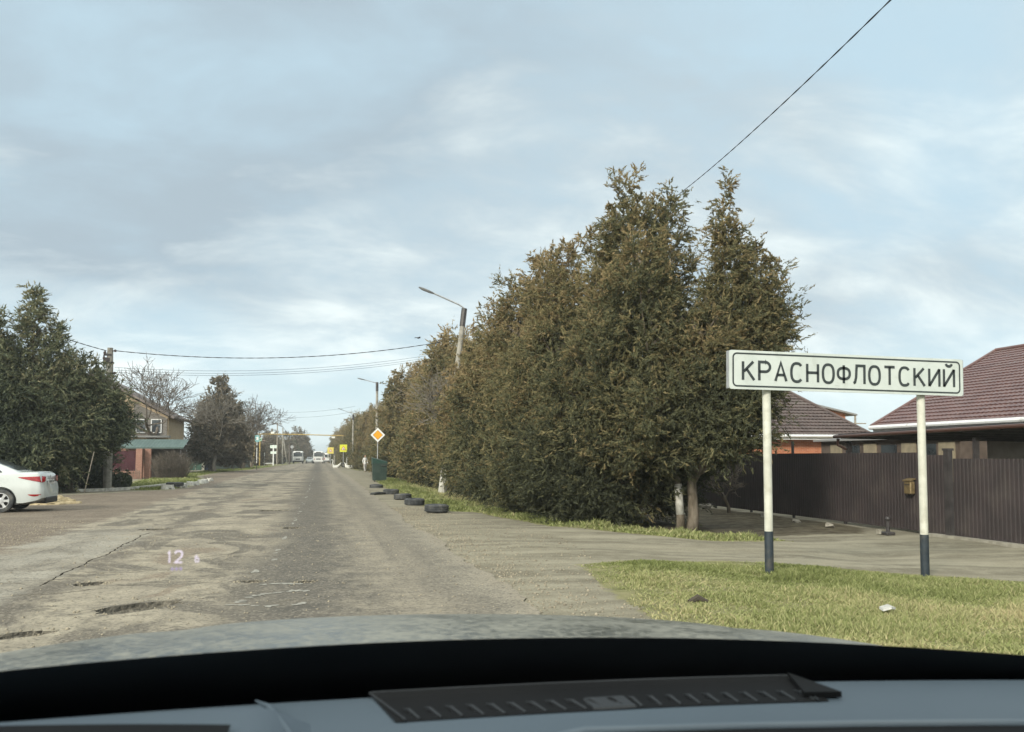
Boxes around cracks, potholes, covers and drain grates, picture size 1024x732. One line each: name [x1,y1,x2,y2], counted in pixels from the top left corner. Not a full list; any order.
pothole [0,630,60,640]
crack [6,532,256,597]
pothole [94,600,181,615]
